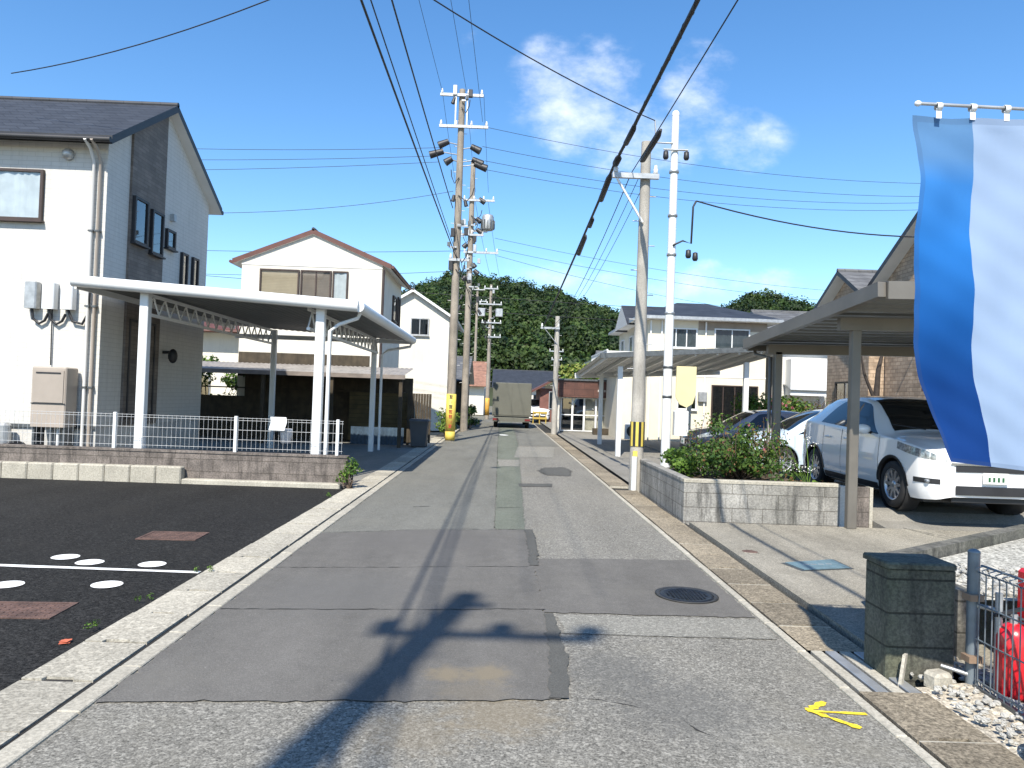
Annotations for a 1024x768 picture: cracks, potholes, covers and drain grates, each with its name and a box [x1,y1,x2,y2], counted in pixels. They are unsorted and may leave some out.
utility cover [135,531,210,541]
utility cover [0,601,79,619]
manhole cover [655,586,719,604]
